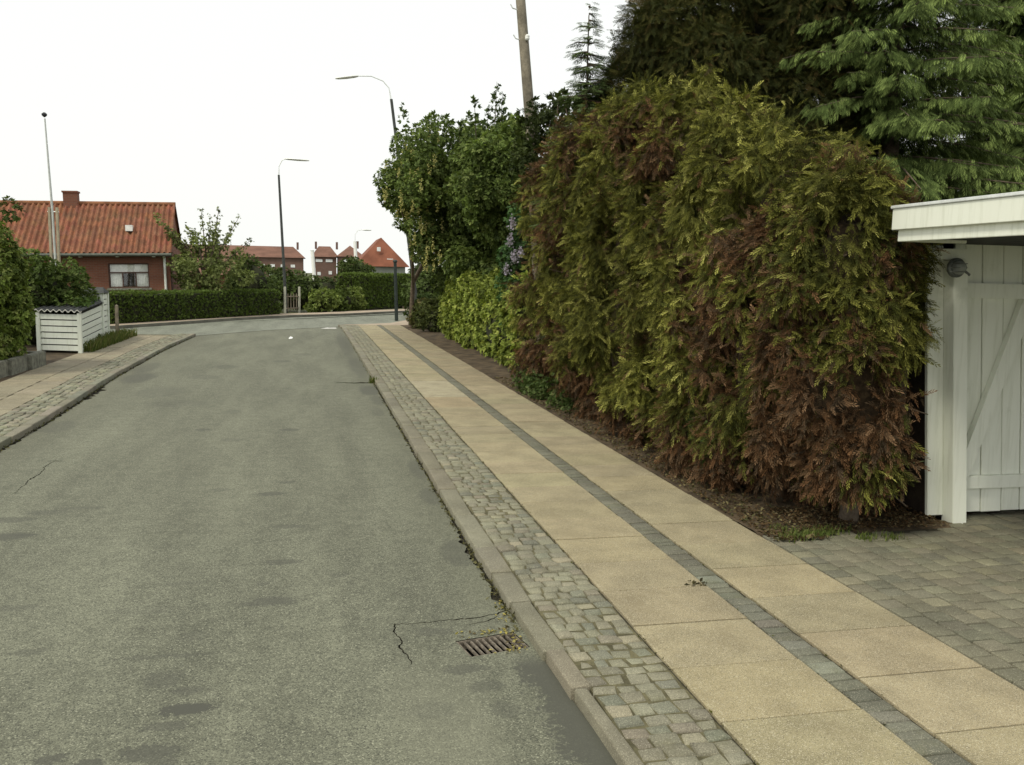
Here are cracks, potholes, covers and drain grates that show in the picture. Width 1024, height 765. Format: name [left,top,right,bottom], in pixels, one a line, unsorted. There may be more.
drain grate [456,632,529,657]
